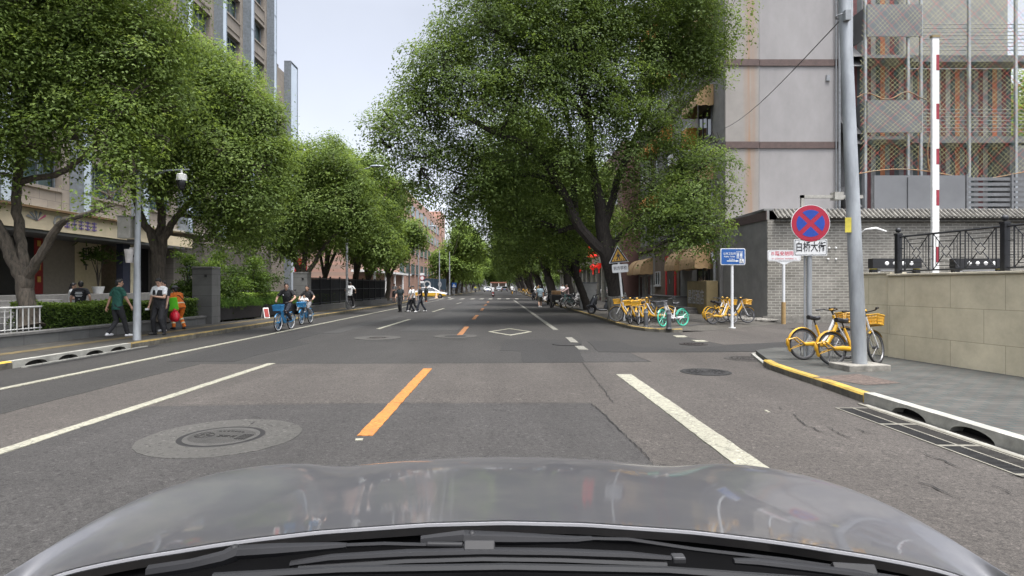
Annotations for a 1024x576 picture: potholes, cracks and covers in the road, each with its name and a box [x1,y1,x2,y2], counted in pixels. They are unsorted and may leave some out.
manhole cover [680,368,732,376]
drain grate [879,424,978,446]
manhole cover [132,419,302,459]
drain grate [936,445,1024,475]
drain grate [836,408,916,425]
